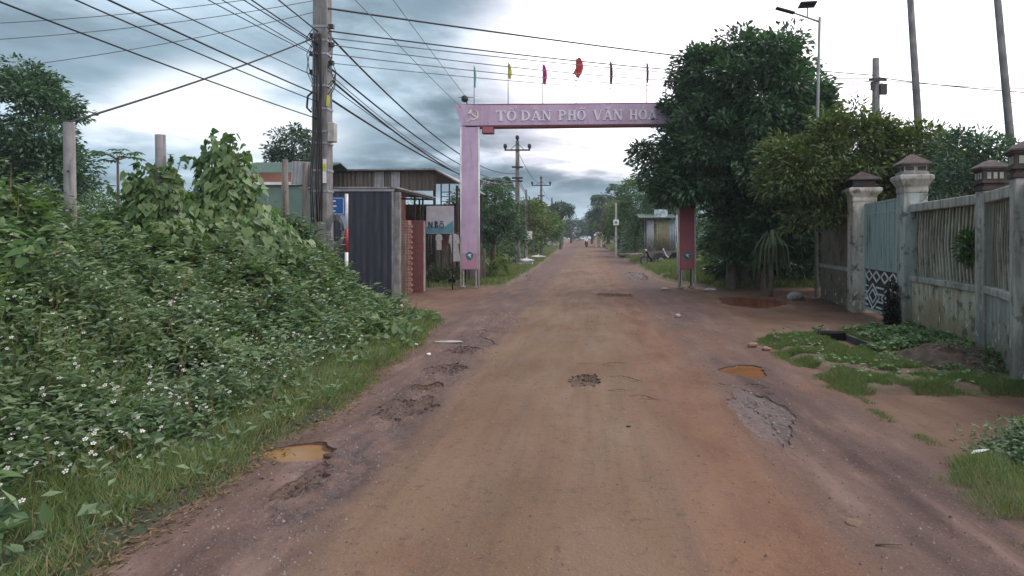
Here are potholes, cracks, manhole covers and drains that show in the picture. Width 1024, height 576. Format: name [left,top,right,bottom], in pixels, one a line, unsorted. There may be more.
pothole [713,296,797,311]
pothole [565,373,605,389]
pothole [363,394,449,429]
crack [576,362,659,399]
pothole [409,381,447,393]
pothole [718,381,807,461]
pothole [248,439,346,465]
pothole [420,361,472,376]
pothole [443,345,481,356]
pothole [710,364,772,380]
pothole [623,271,651,283]
